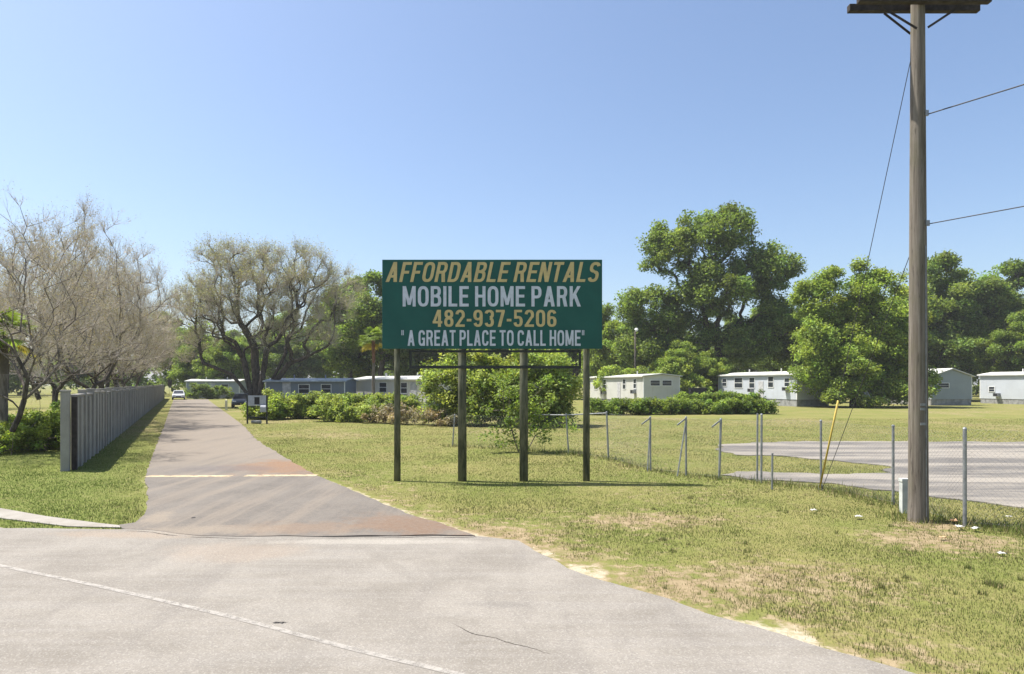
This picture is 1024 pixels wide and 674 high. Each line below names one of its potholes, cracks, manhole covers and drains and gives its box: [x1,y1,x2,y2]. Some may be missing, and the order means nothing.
crack [454,624,549,654]
